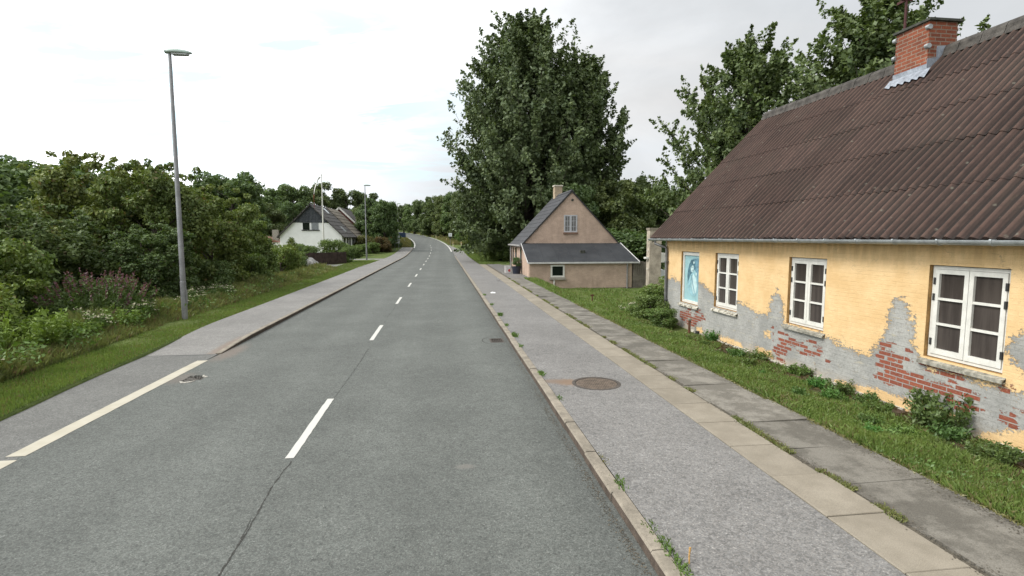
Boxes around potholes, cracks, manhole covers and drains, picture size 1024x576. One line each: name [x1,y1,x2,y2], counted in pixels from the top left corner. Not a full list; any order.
manhole cover [572,377,621,390]
crack [217,461,292,576]
pothole [167,372,220,385]
